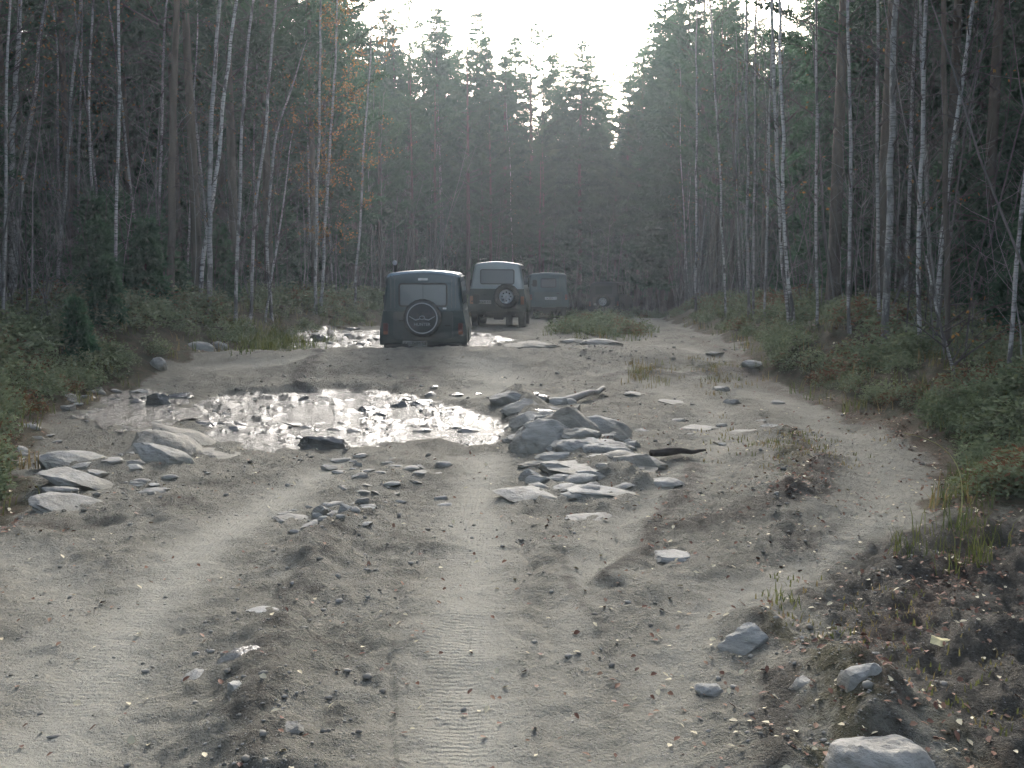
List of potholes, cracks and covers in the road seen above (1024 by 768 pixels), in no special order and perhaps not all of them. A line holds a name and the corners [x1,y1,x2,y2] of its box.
pothole [184,380,528,453]
pothole [264,320,524,351]
